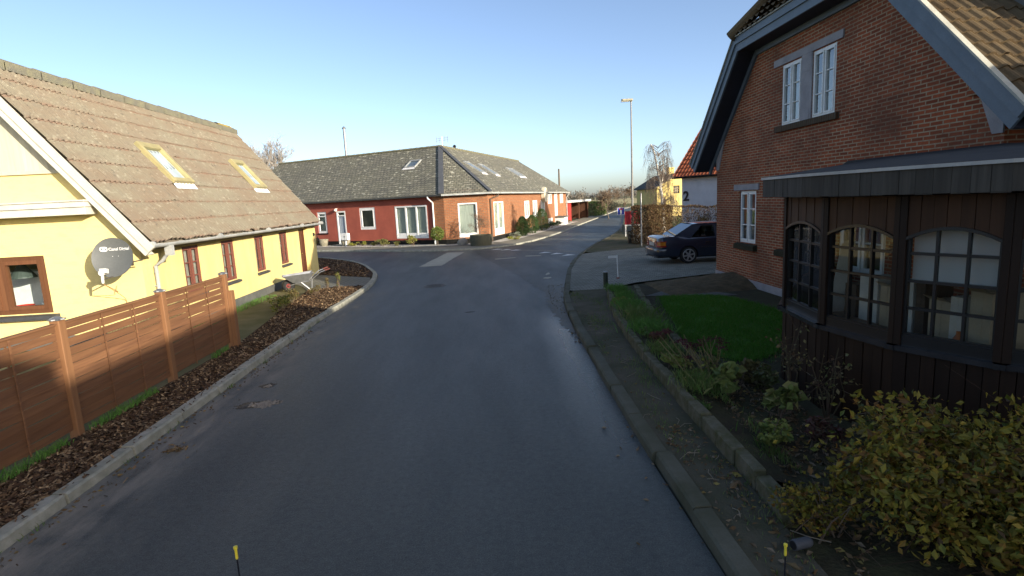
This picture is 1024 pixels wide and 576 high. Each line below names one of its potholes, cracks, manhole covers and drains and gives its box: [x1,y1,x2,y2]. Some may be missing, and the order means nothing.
pothole [233,399,283,409]
